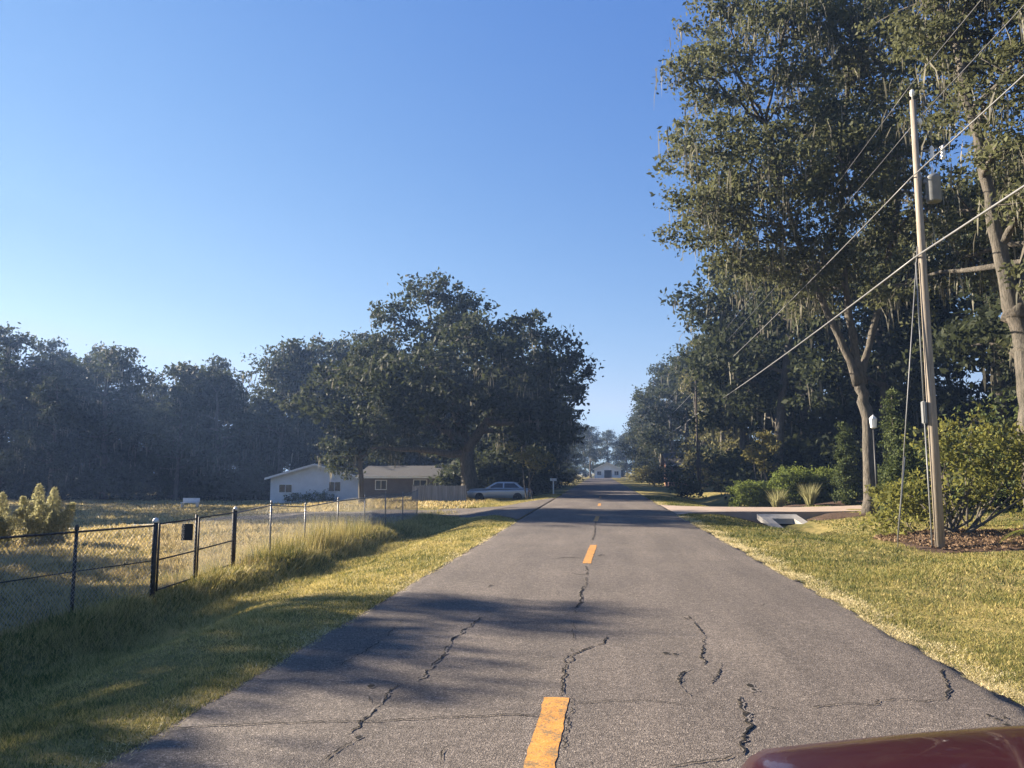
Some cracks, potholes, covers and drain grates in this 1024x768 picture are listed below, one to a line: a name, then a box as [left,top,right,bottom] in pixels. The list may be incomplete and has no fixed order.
crack [595,616,953,766]
crack [562,557,588,608]
crack [180,616,537,764]
